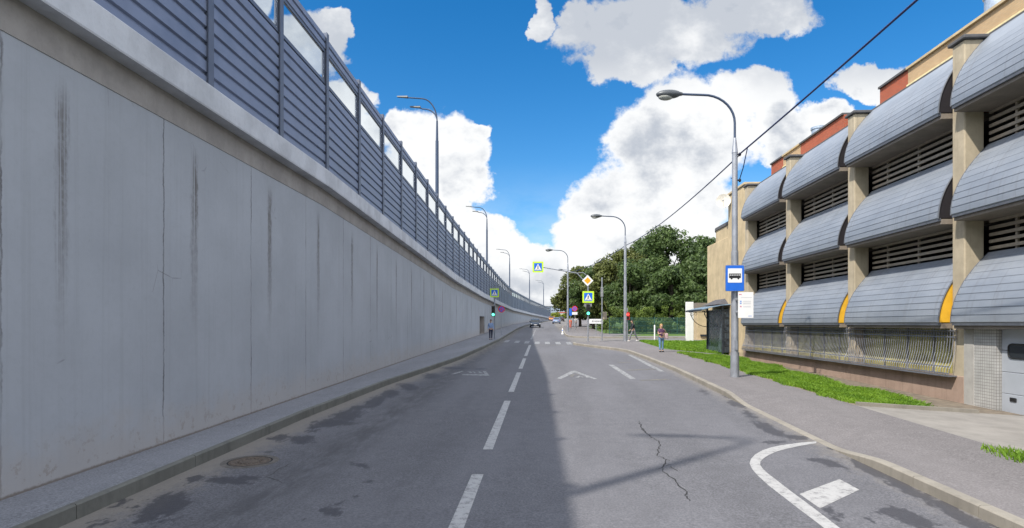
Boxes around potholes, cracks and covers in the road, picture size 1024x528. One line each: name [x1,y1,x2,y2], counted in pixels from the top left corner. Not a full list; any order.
crack [639,423,690,501]
manhole cover [220,455,279,468]
